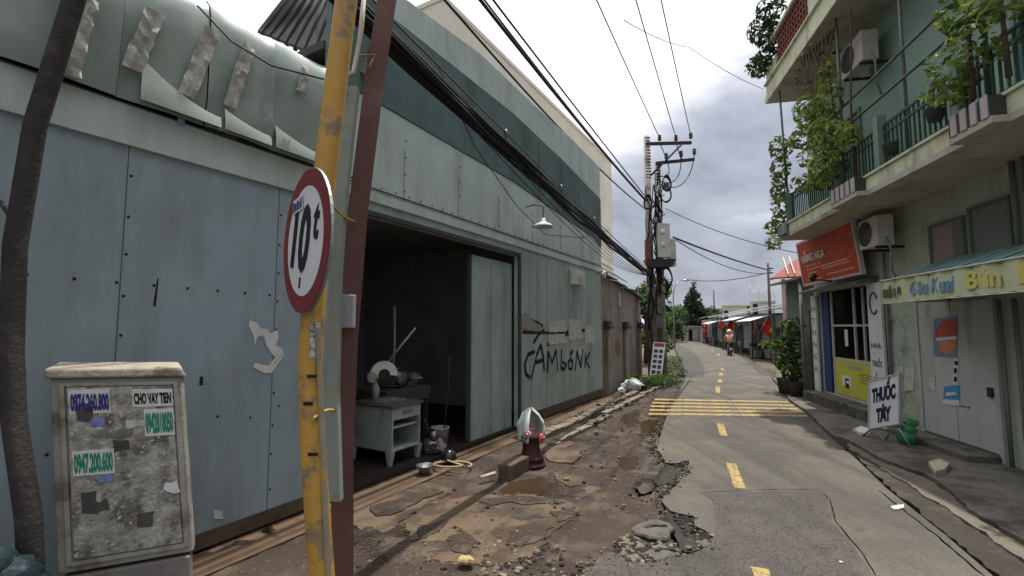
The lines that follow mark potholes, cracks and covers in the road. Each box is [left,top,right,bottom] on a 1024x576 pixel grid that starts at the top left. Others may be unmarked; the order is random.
pothole [634,477,657,496]
pothole [659,512,712,554]
pothole [653,461,690,497]
